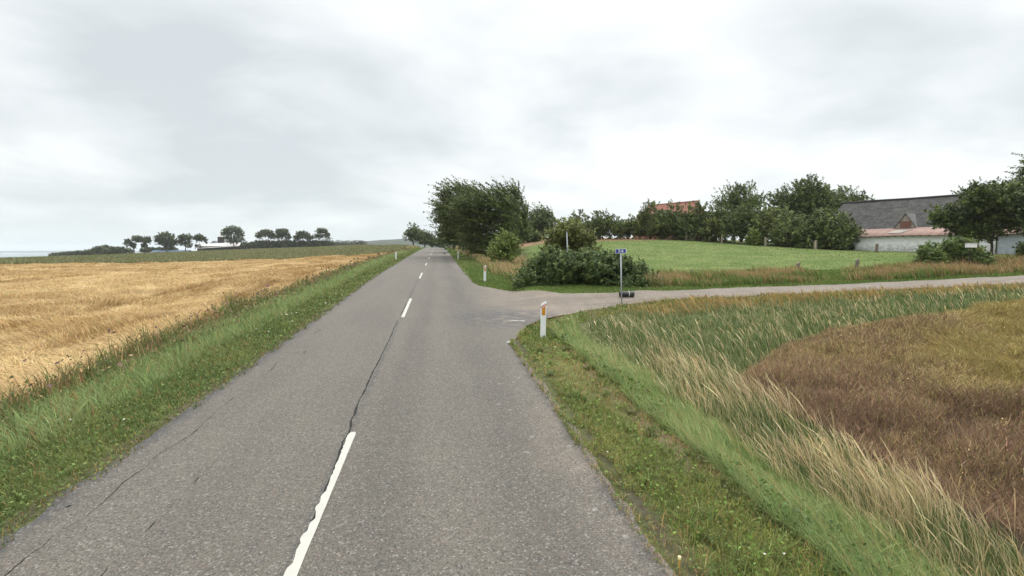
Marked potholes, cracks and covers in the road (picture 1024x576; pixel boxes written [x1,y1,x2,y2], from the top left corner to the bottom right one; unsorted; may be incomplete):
crack [4,358,282,576]
